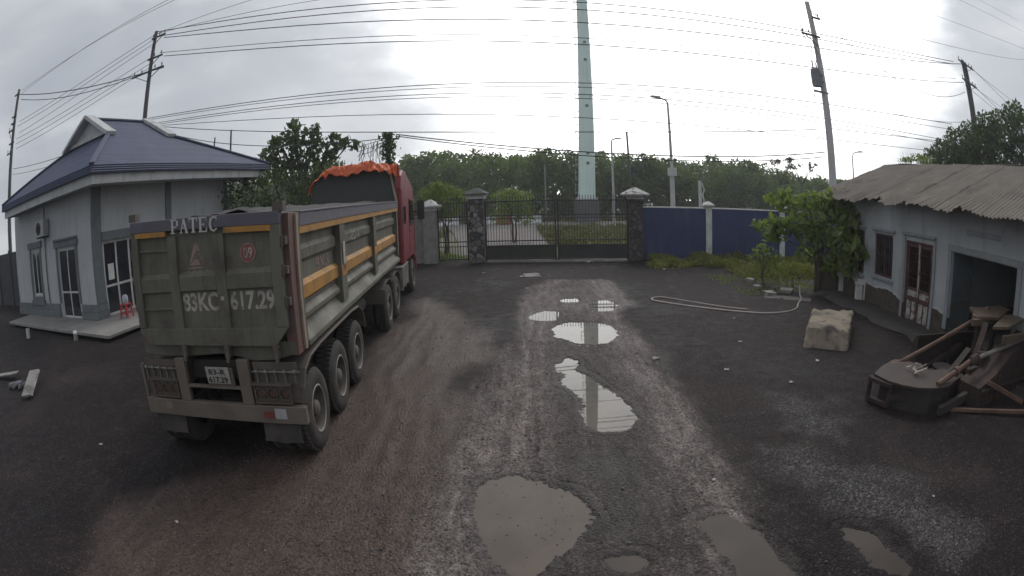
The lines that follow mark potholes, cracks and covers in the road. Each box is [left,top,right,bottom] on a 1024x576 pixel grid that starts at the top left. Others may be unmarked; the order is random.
pothole [829,518,926,576]
pothole [585,299,623,313]
pothole [460,471,610,576]
pothole [584,545,666,576]
pothole [680,506,820,576]
pothole [523,309,566,322]
pothole [547,355,647,437]
pothole [544,320,624,346]
